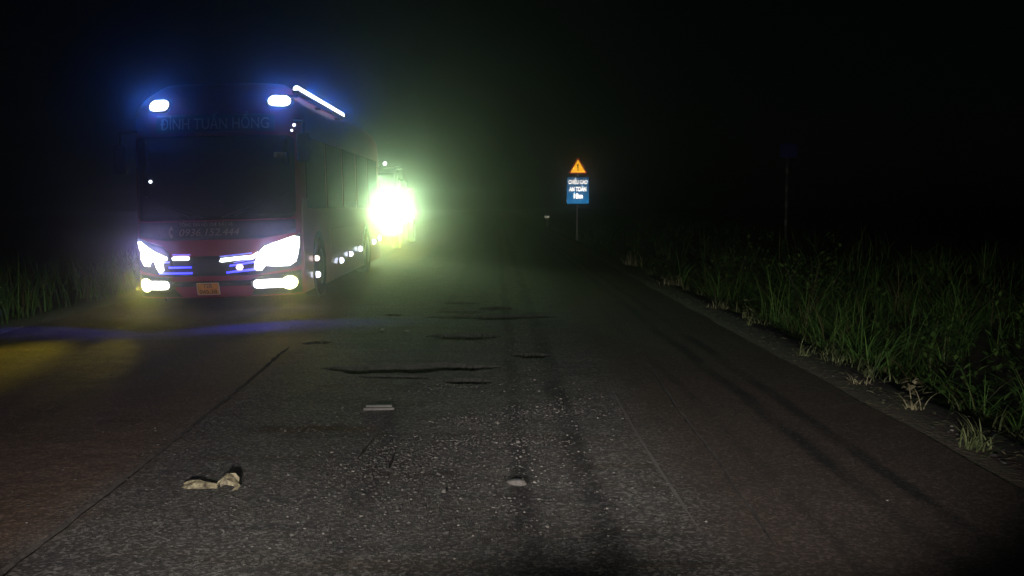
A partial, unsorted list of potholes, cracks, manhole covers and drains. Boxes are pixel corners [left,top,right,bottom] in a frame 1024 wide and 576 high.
crack [358,434,397,468]
